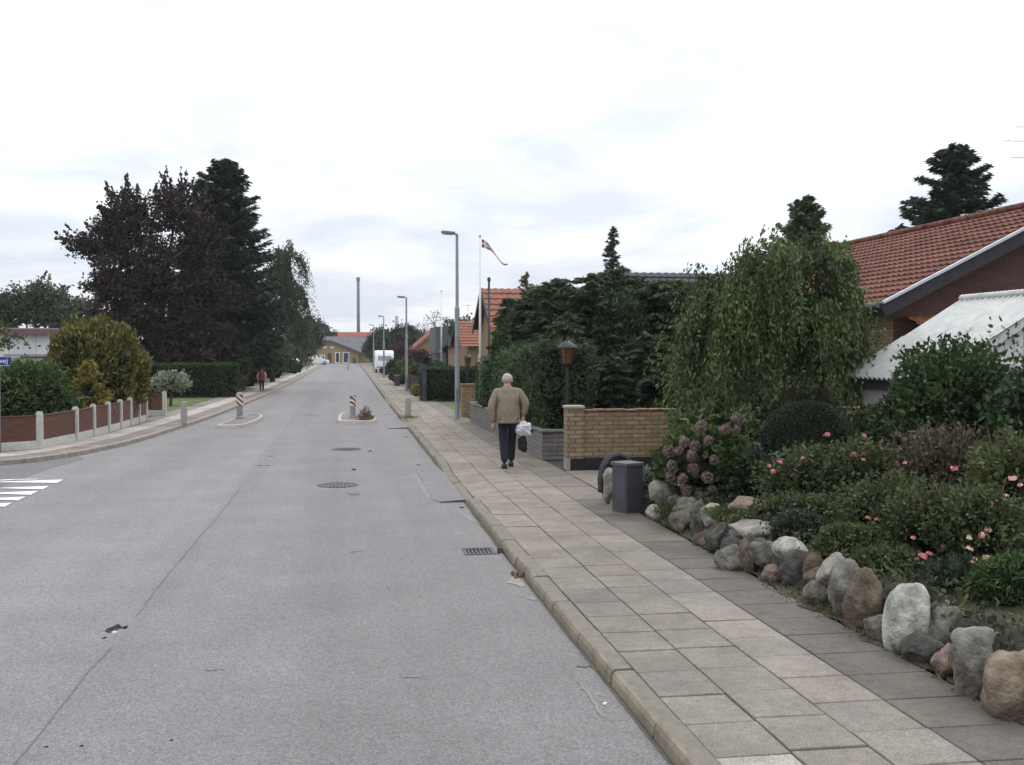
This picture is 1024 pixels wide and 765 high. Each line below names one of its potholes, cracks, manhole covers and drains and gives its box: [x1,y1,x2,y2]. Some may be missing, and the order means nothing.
drain grate [461,547,496,555]
